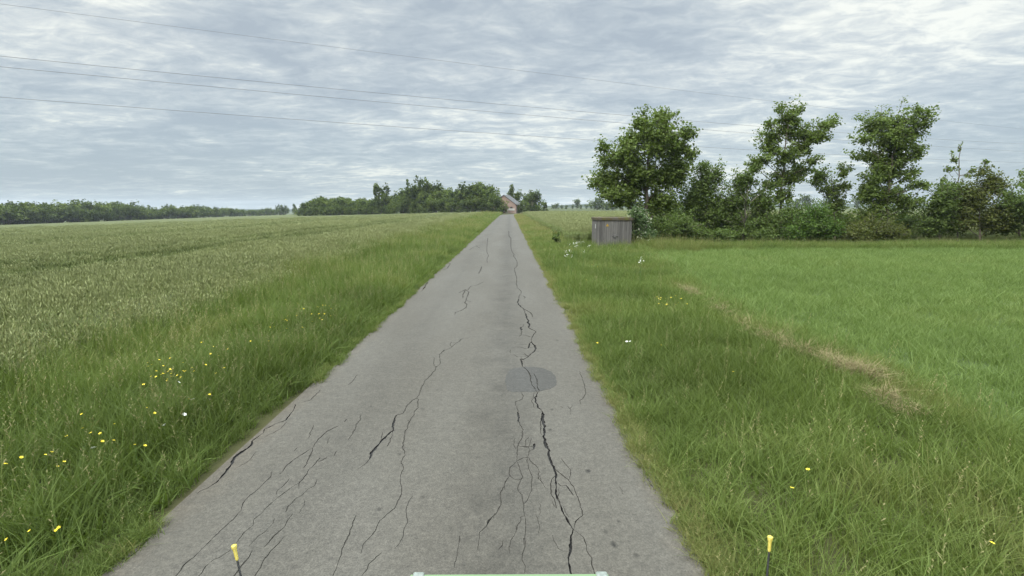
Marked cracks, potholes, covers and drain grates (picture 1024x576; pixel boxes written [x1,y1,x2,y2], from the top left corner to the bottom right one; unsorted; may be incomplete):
crack [176,339,461,576]
crack [454,231,595,574]
